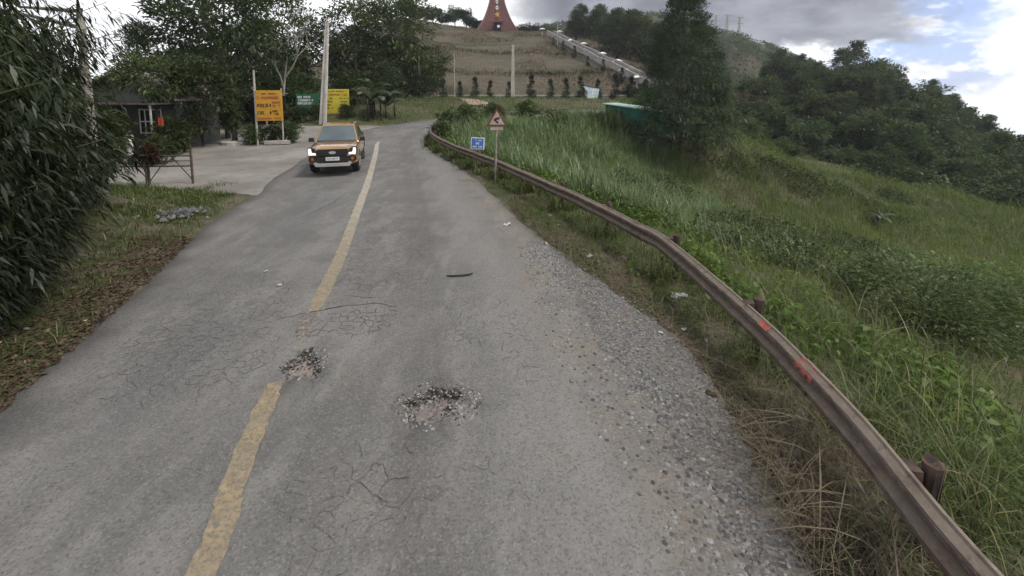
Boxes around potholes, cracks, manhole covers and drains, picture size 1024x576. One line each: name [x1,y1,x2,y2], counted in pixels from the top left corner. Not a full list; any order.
crack [85,223,431,412]
pothole [394,380,482,432]
pothole [279,347,330,381]
crack [277,442,530,576]
